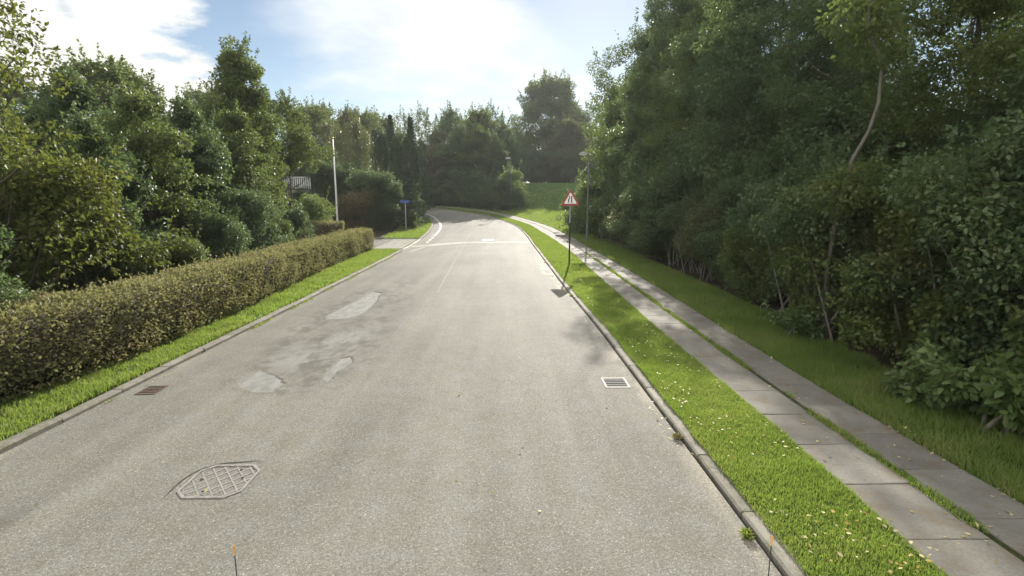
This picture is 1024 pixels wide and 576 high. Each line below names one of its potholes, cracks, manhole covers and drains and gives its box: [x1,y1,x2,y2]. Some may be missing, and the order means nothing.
drain grate [601,378,631,388]
manhole cover [176,464,261,499]
drain grate [134,385,169,395]
